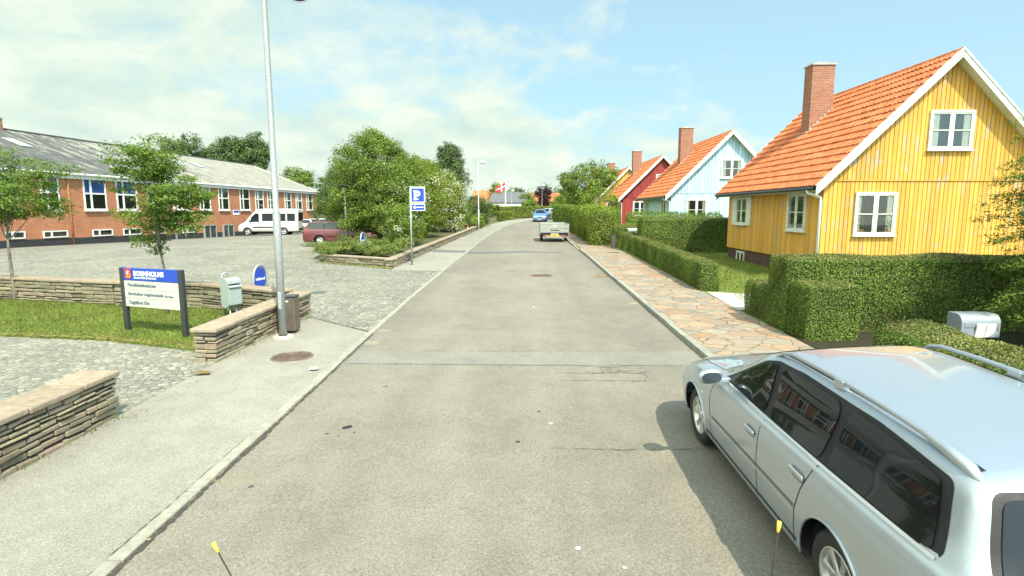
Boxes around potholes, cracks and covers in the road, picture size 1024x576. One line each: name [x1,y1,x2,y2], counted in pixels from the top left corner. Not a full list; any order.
manhole cover [270,351,314,363]
